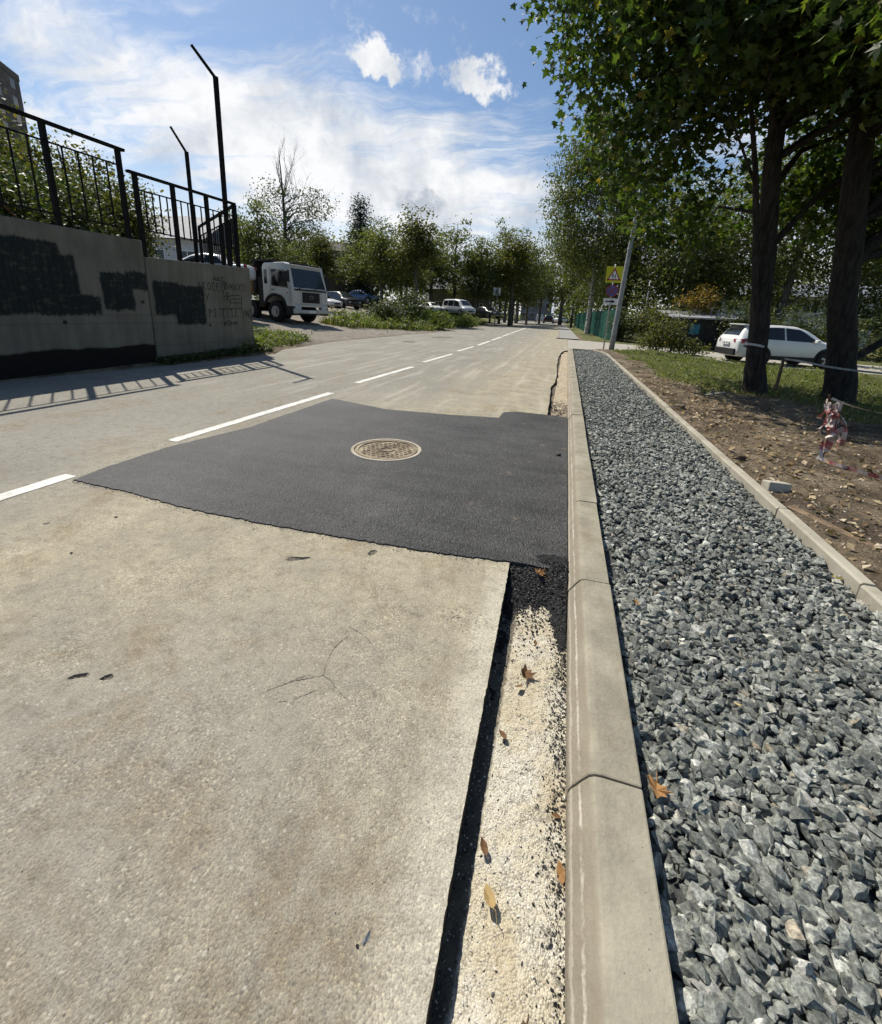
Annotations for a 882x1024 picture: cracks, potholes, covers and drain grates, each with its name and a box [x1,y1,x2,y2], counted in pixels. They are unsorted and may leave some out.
crack [267,627,372,703]
manhole cover [351,439,421,461]
